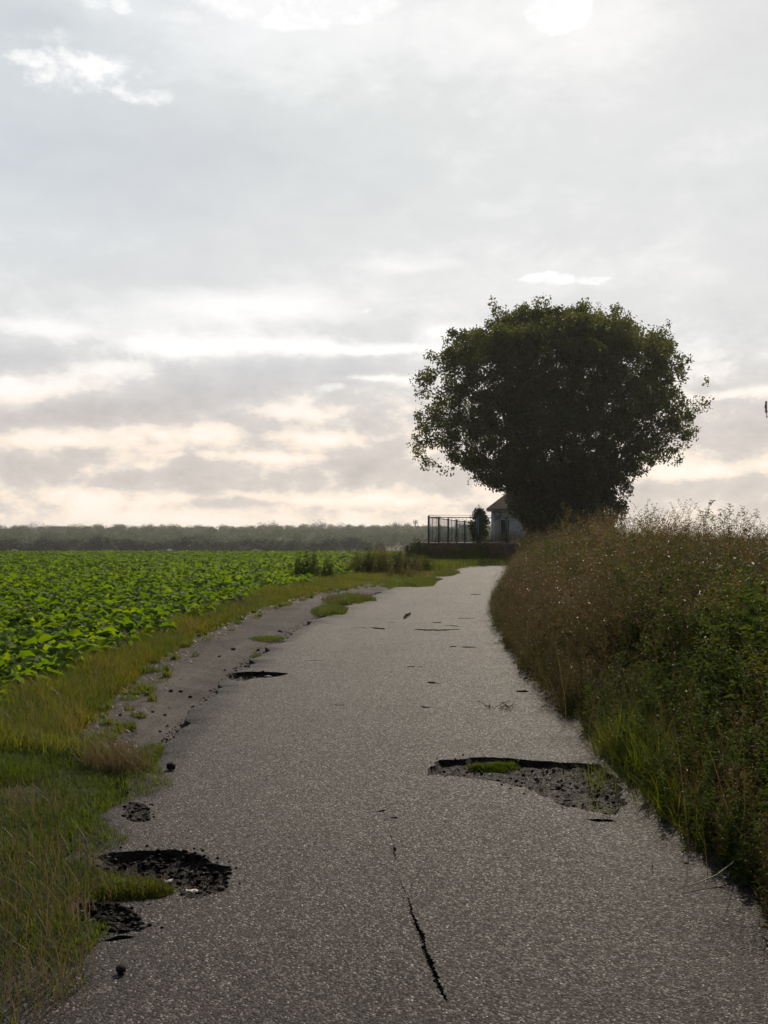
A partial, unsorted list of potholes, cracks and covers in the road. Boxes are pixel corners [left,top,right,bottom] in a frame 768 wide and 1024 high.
crack [377,809,448,1004]
pothole [64,900,164,937]
pothole [121,801,155,824]
pothole [422,754,634,817]
pothole [228,670,289,681]
